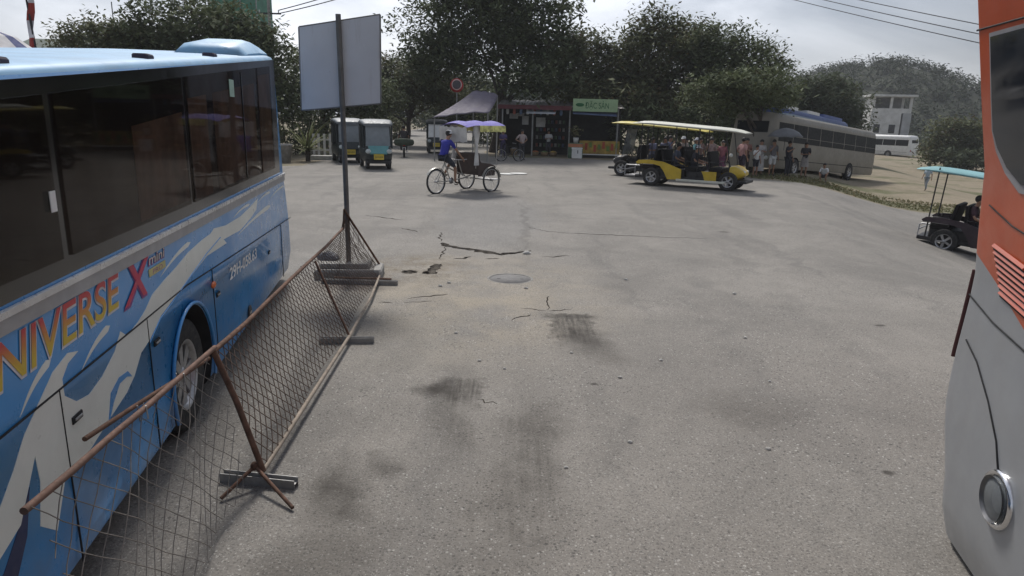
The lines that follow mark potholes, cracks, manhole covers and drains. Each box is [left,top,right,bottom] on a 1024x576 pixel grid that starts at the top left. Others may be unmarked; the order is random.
pothole [422,264,442,274]
crack [438,227,702,259]
manhole cover [487,273,533,284]
crack [512,296,569,320]
